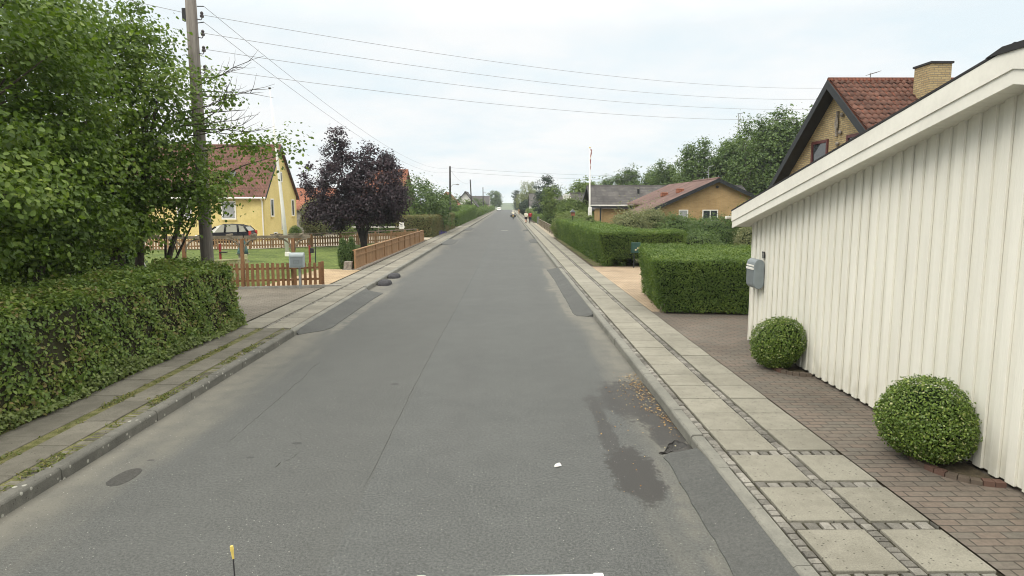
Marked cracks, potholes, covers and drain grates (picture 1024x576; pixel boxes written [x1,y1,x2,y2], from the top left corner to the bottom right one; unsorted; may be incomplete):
pothole [659,440,687,455]
